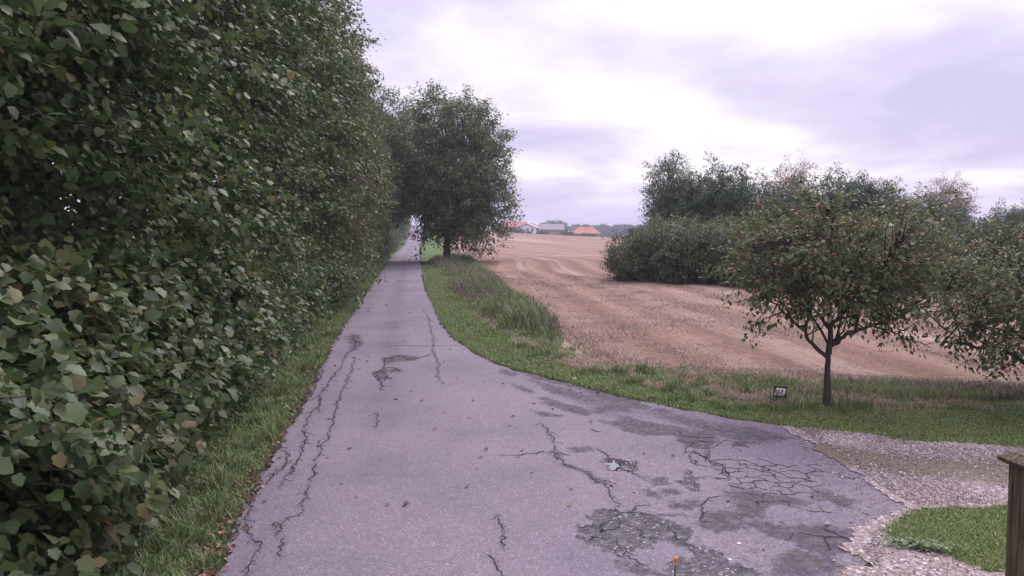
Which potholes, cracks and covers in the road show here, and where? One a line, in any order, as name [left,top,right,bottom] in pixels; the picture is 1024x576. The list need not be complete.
crack [238,333,362,575]
crack [499,423,695,566]
crack [372,309,451,391]
pothole [600,458,639,472]
crack [487,518,506,576]
crack [679,433,860,550]
